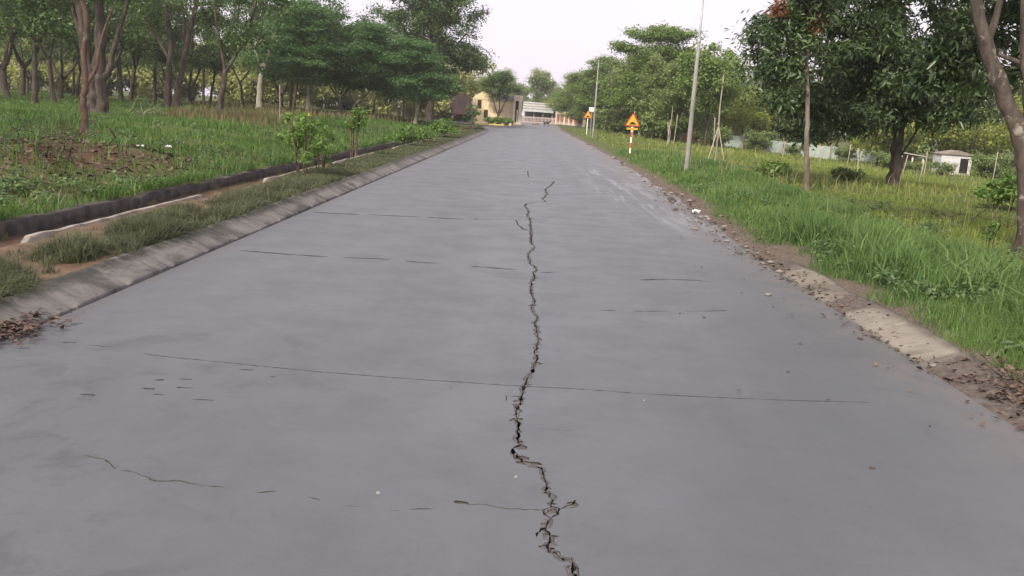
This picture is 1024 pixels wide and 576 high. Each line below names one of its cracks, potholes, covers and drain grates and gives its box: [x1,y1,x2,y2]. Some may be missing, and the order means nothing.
crack [453,171,579,576]
crack [85,455,430,511]
